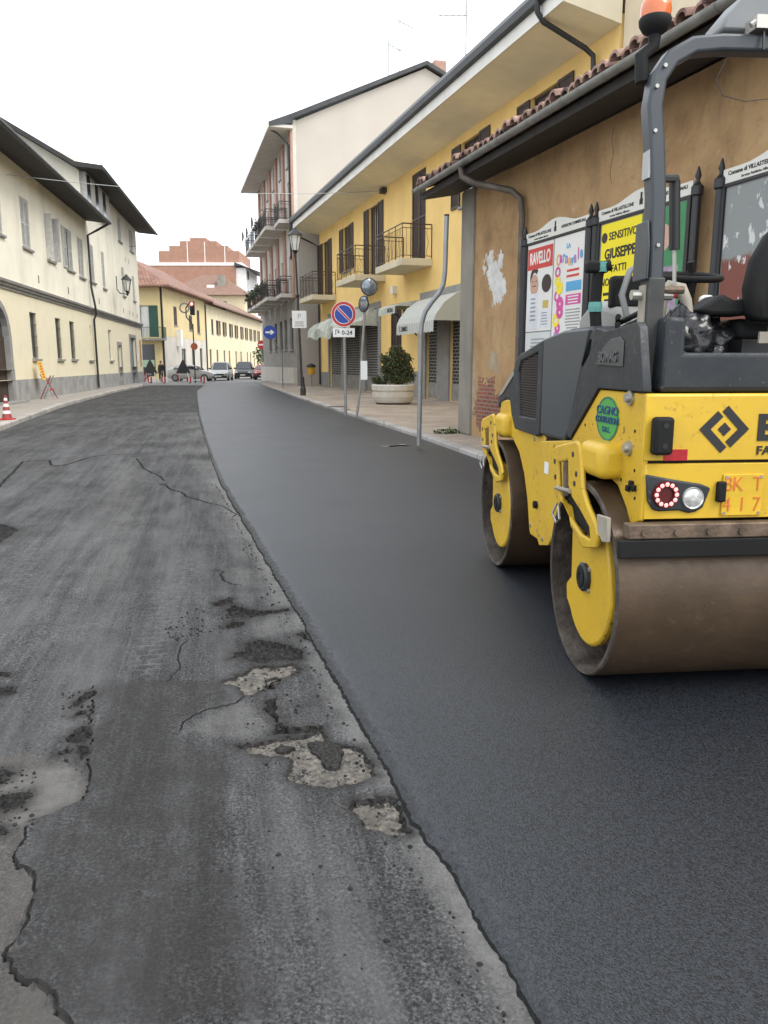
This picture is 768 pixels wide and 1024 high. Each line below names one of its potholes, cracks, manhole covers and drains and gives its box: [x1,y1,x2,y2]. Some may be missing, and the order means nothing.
pothole [0,792,33,810]
pothole [0,686,18,696]
pothole [65,726,93,743]
crack [166,639,243,733]
pothole [349,796,413,836]
crack [0,453,237,517]
pothole [233,730,376,789]
pothole [73,689,98,707]
pothole [219,663,302,695]
pothole [231,640,303,664]
